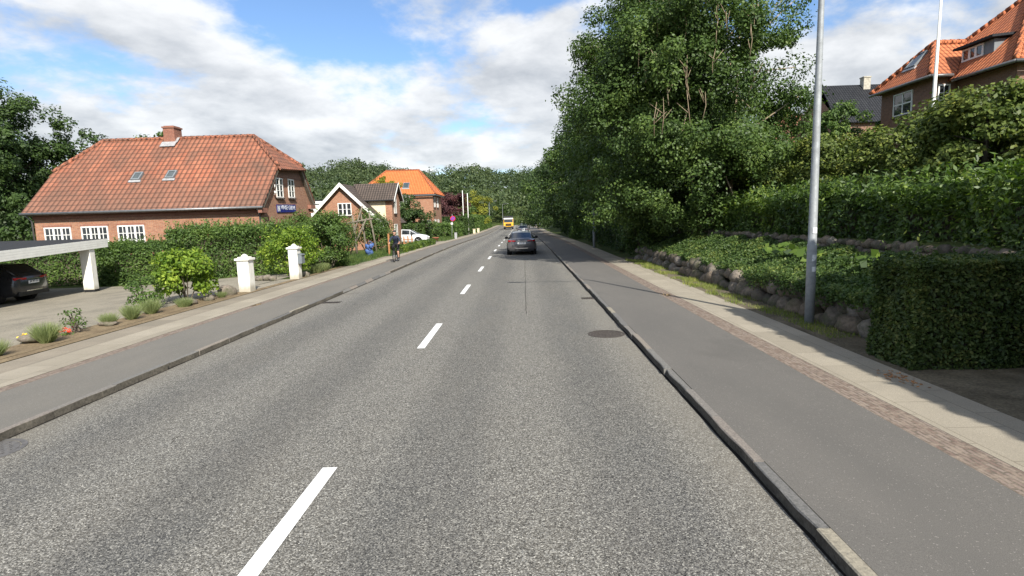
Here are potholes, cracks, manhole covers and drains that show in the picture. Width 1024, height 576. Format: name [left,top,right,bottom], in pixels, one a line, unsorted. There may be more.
manhole cover [0,438,28,458]
manhole cover [588,330,625,338]
